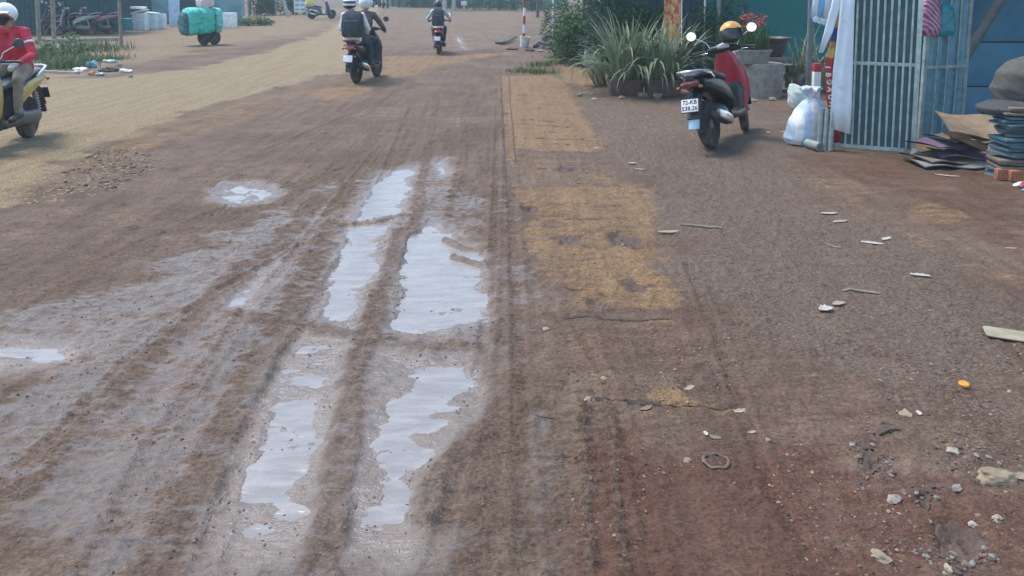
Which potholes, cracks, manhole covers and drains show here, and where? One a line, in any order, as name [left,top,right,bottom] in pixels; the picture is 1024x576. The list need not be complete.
crack [581,397,734,411]
pothole [208,181,281,207]
